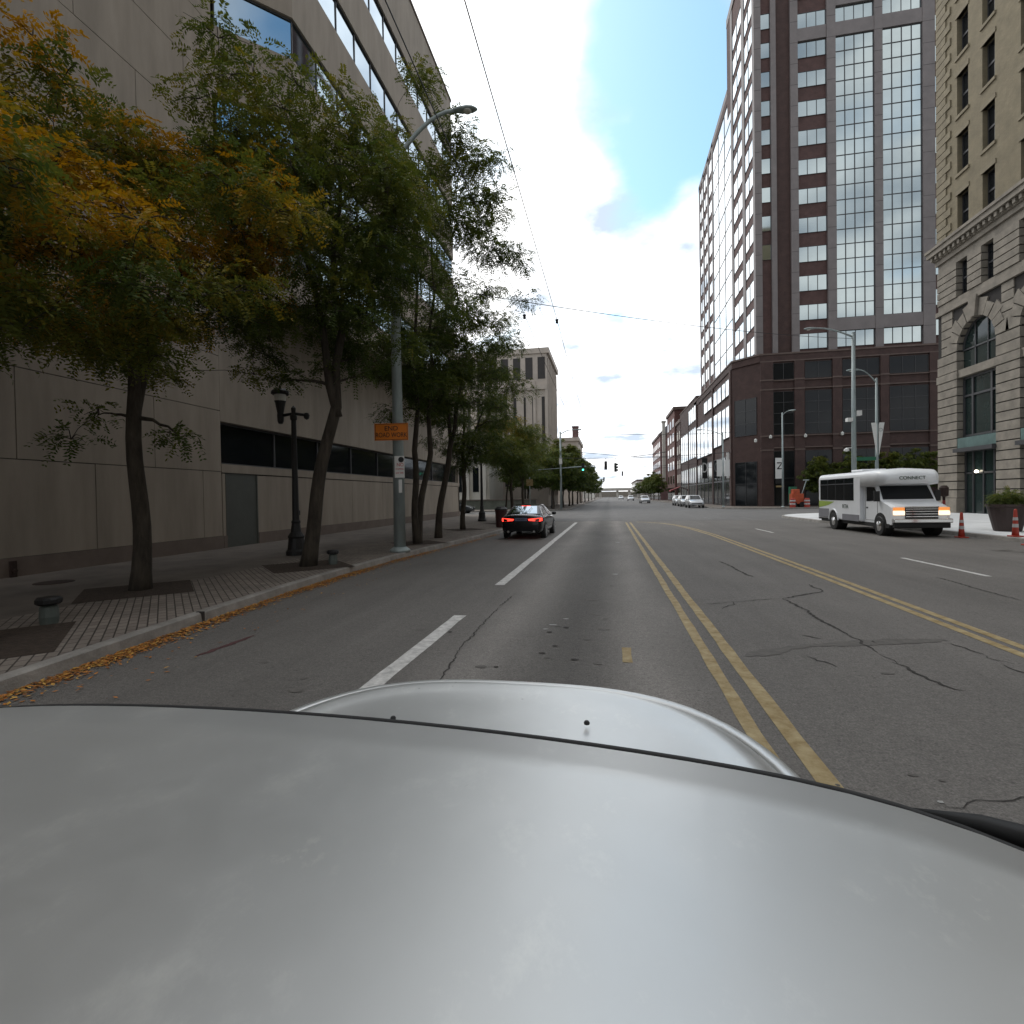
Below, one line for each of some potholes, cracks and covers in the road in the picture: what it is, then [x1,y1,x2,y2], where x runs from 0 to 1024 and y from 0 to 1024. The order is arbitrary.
crack [936,796,1024,808]
crack [711,584,965,691]
